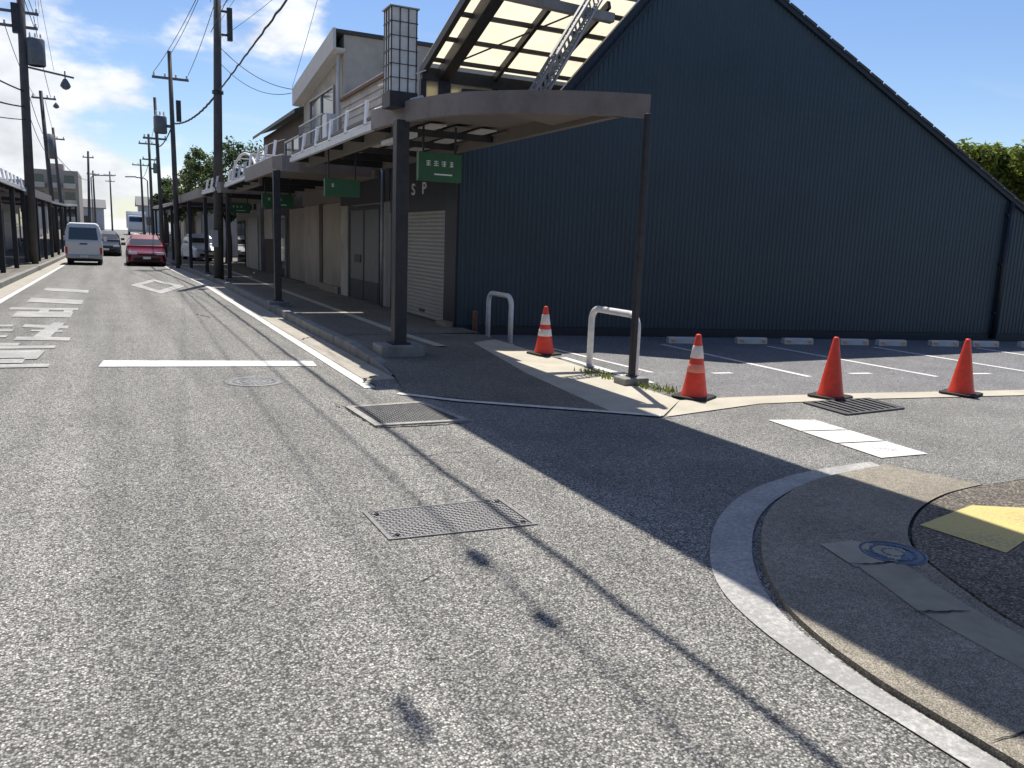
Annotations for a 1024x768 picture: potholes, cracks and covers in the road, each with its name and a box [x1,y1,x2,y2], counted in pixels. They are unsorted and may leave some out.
manhole cover [362,498,538,541]
drain grate [803,398,905,415]
manhole cover [224,376,285,387]
manhole cover [859,540,928,565]
